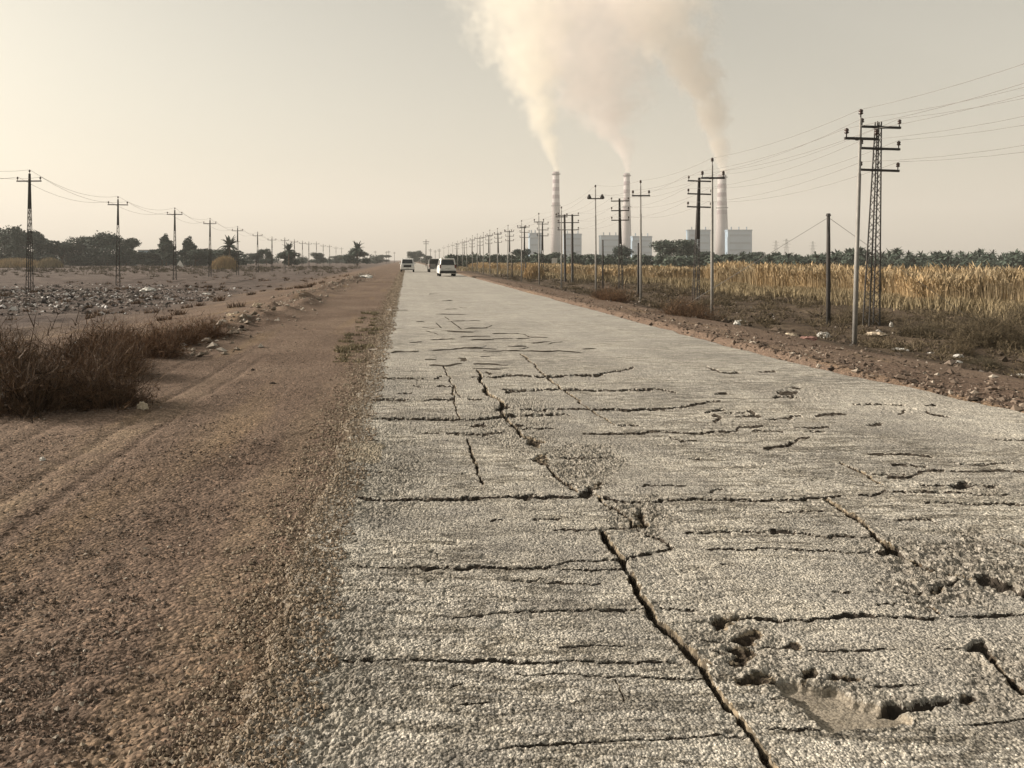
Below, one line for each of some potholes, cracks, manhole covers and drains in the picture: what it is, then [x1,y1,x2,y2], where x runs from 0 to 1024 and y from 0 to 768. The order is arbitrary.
pothole [828,673,862,682]
pothole [881,699,952,720]
pothole [711,616,739,631]
pothole [727,646,757,668]
crack [306,300,1024,768]
pothole [731,628,764,647]
pothole [974,574,1024,599]
pothole [734,670,777,686]
pothole [775,681,913,733]
pothole [966,641,992,660]
pothole [632,510,649,529]
pothole [799,668,818,687]
